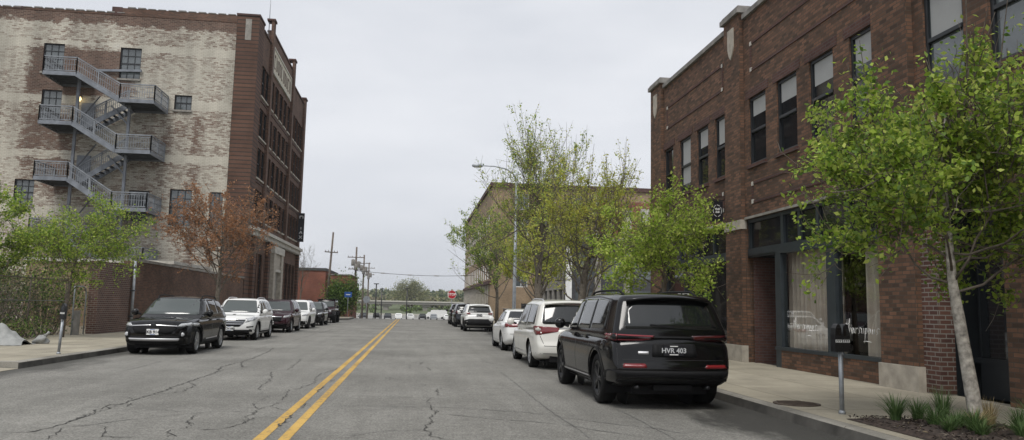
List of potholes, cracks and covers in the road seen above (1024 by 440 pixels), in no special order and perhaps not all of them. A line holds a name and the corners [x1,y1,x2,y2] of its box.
crack [13,330,337,439]
crack [351,362,454,439]
